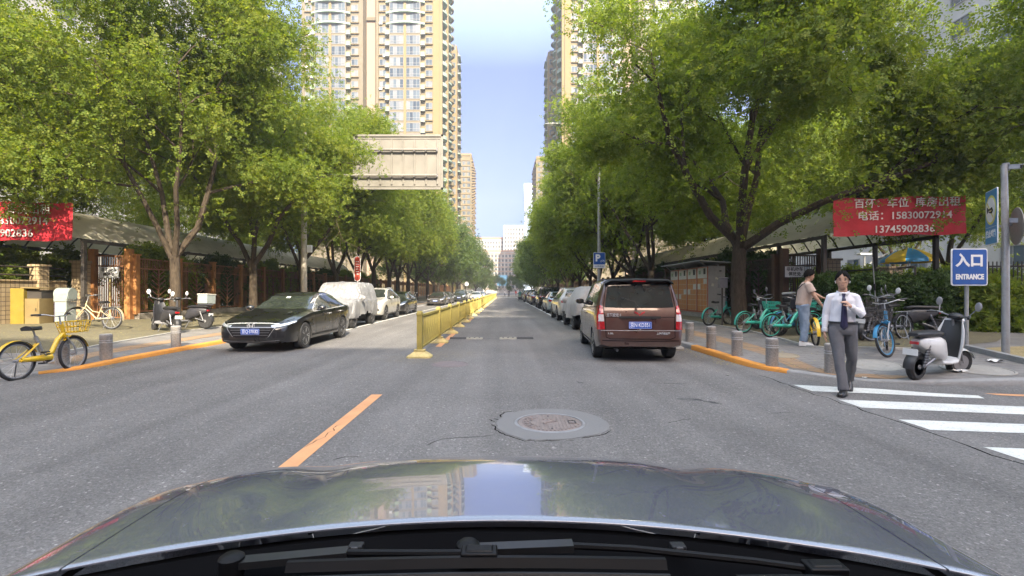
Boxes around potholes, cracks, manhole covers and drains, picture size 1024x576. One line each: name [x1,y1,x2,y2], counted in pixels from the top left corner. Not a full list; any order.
manhole cover [496,409,609,440]
crack [428,411,609,445]
